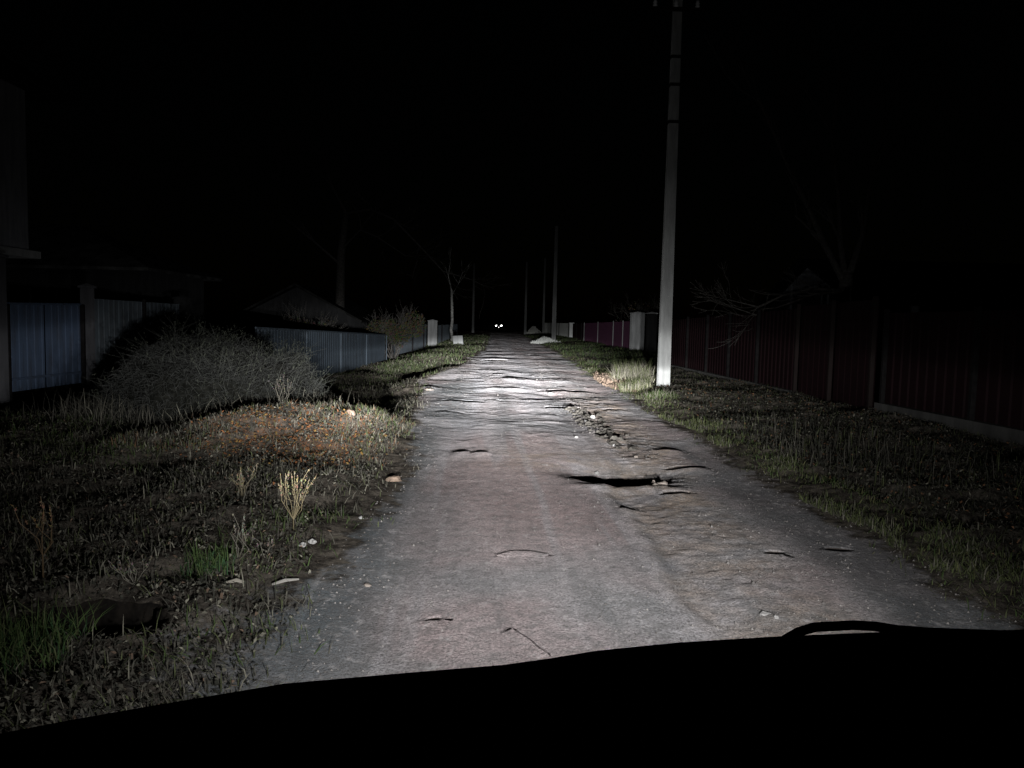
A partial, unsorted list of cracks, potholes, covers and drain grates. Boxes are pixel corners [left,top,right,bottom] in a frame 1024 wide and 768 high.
pothole [559,473,680,489]
crack [500,628,556,659]
crack [493,549,551,559]
